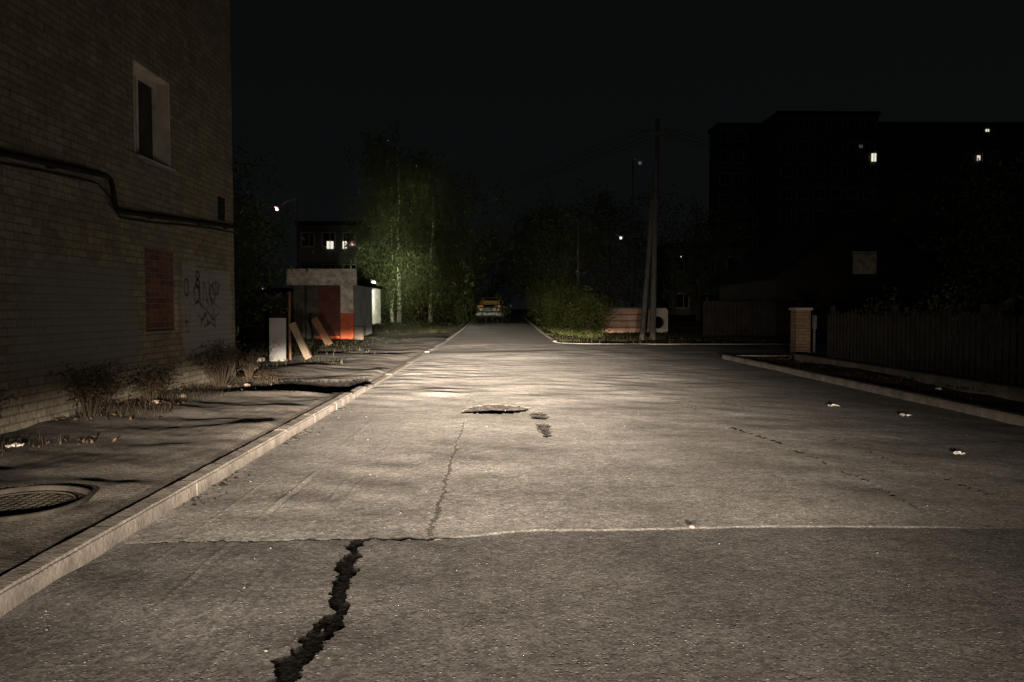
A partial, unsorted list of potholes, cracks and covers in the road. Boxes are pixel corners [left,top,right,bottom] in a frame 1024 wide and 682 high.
pothole [534,423,552,438]
pothole [251,377,374,394]
manhole cover [0,485,93,523]
crack [150,421,466,682]
crack [675,401,994,508]
pothole [529,412,551,420]
